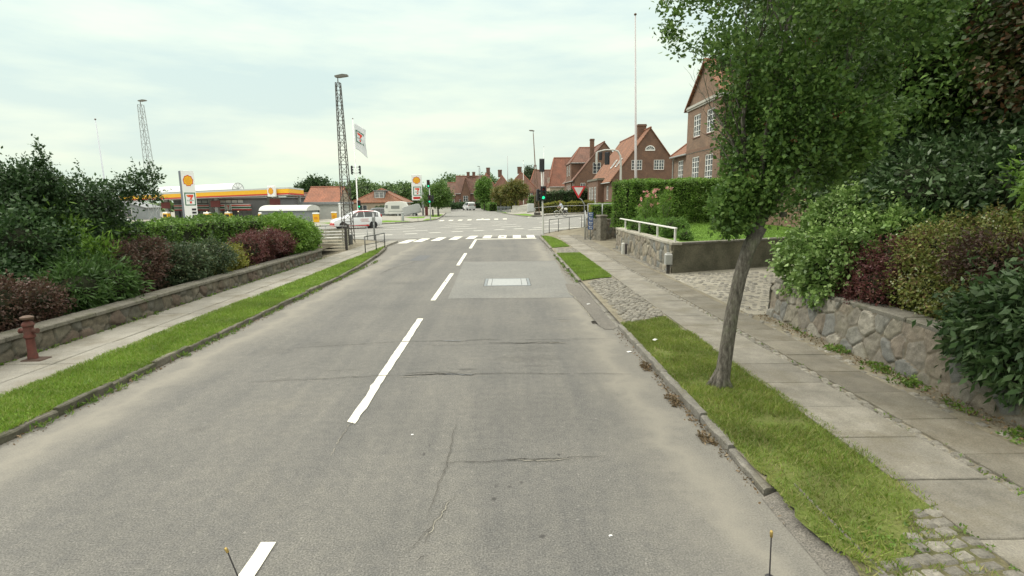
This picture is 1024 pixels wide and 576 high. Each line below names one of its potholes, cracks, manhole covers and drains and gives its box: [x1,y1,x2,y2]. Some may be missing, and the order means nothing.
crack [315,338,602,347]
manhole cover [484,278,531,286]
crack [408,423,606,557]
crack [261,369,615,382]
